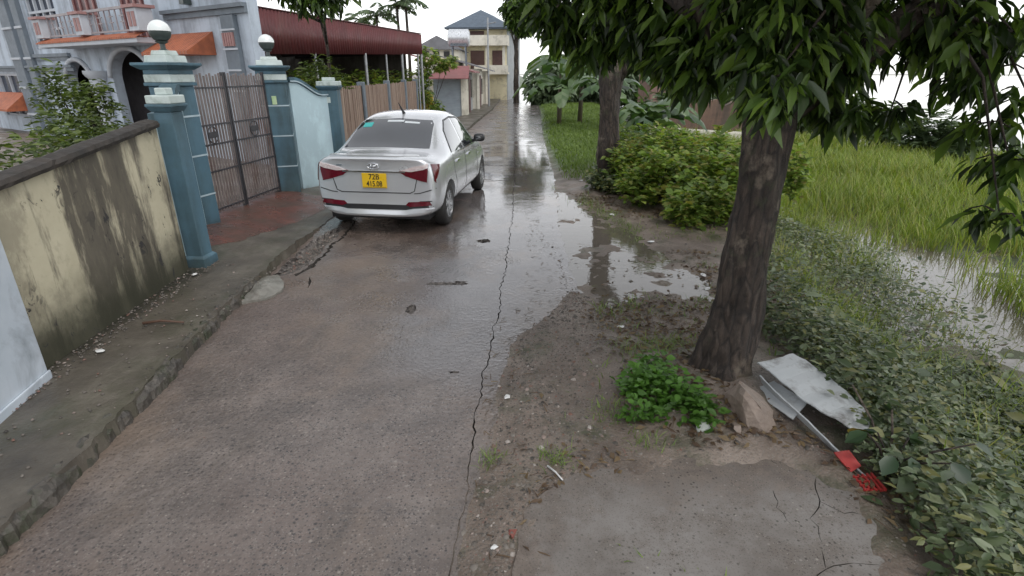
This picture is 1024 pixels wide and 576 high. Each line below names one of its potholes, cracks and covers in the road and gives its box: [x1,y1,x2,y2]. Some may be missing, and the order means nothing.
crack [810,481,875,576]
crack [294,221,356,287]
crack [448,143,515,576]
